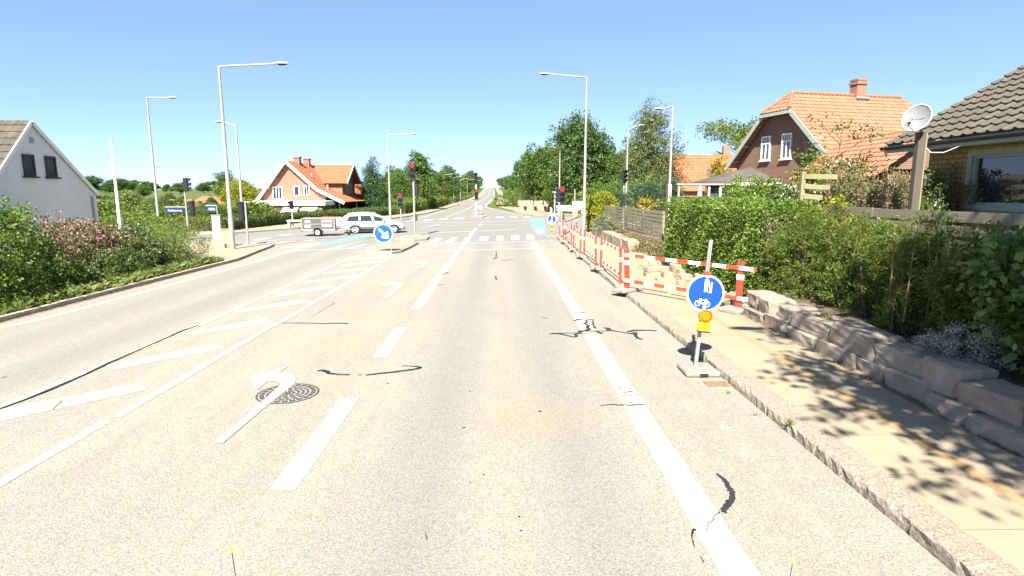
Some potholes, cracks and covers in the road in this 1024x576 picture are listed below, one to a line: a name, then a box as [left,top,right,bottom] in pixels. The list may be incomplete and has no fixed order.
crack [600,387,645,406]
crack [691,473,736,562]
manhole cover [255,383,319,404]
